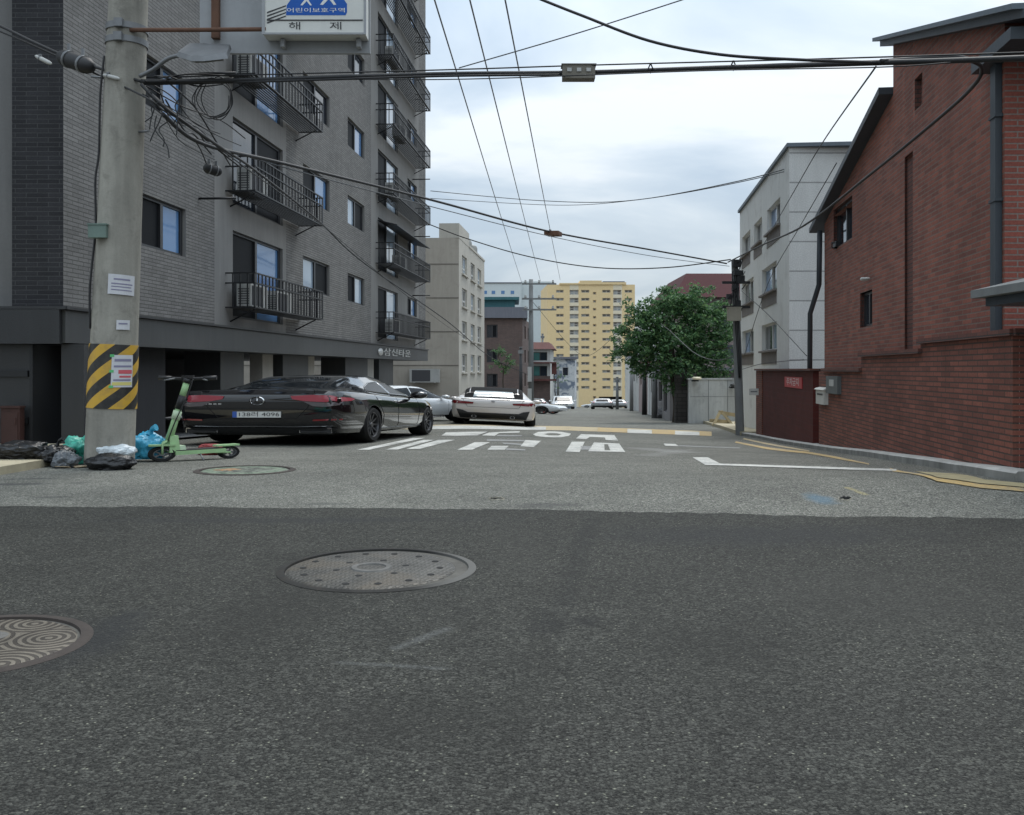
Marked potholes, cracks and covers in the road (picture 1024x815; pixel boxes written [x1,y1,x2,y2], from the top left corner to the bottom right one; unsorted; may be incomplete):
manhole cover [276,548,476,593]
manhole cover [193,465,296,476]
manhole cover [0,614,94,673]
